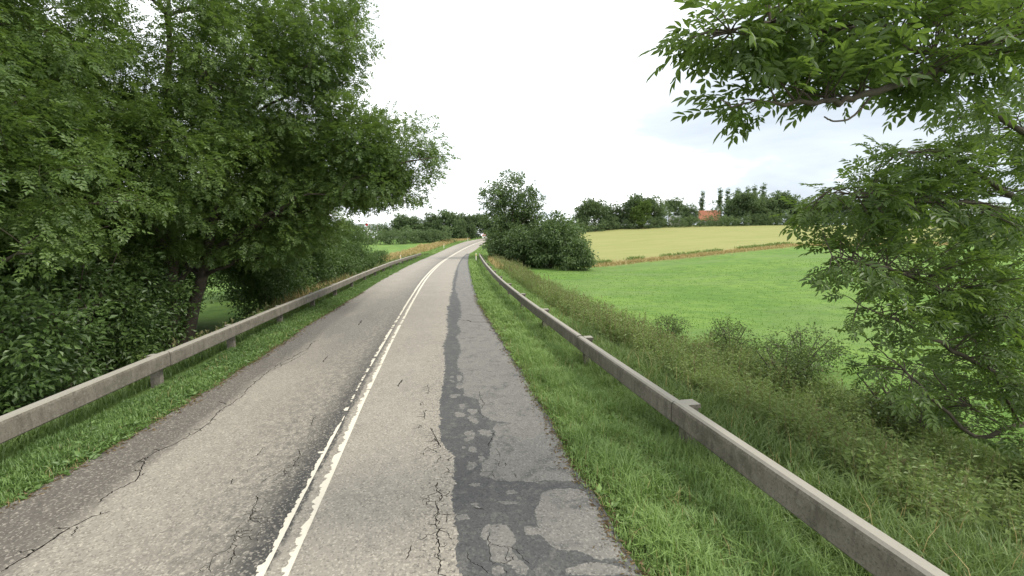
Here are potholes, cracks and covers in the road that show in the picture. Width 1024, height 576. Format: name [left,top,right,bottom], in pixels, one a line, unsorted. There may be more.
crack [3,341,315,571]
crack [414,385,453,576]
crack [467,532,529,574]
